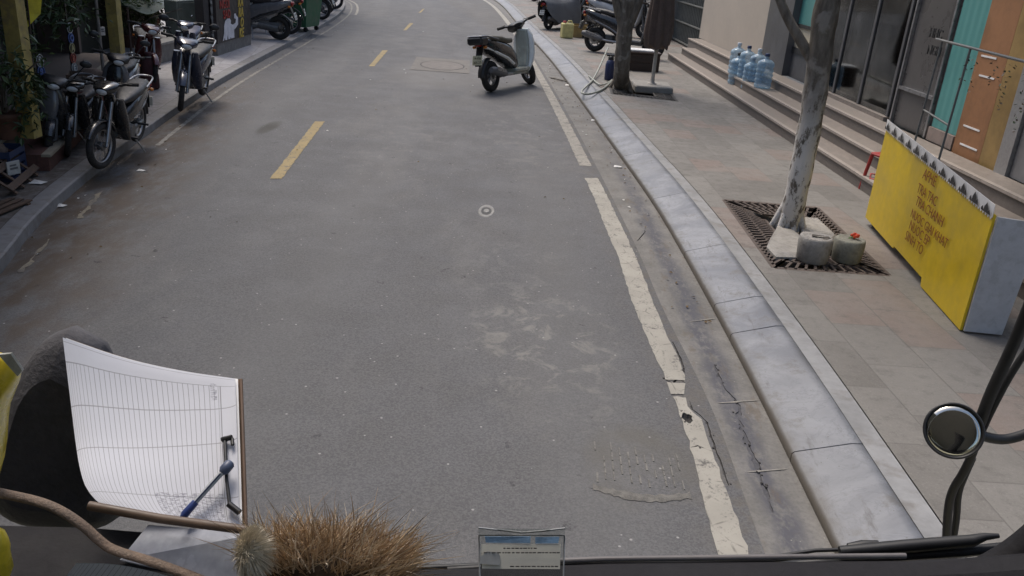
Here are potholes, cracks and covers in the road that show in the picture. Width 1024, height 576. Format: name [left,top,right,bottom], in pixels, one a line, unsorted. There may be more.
crack [663,342,774,513]
utility cover [478,205,494,218]
manhole cover [410,57,470,73]
